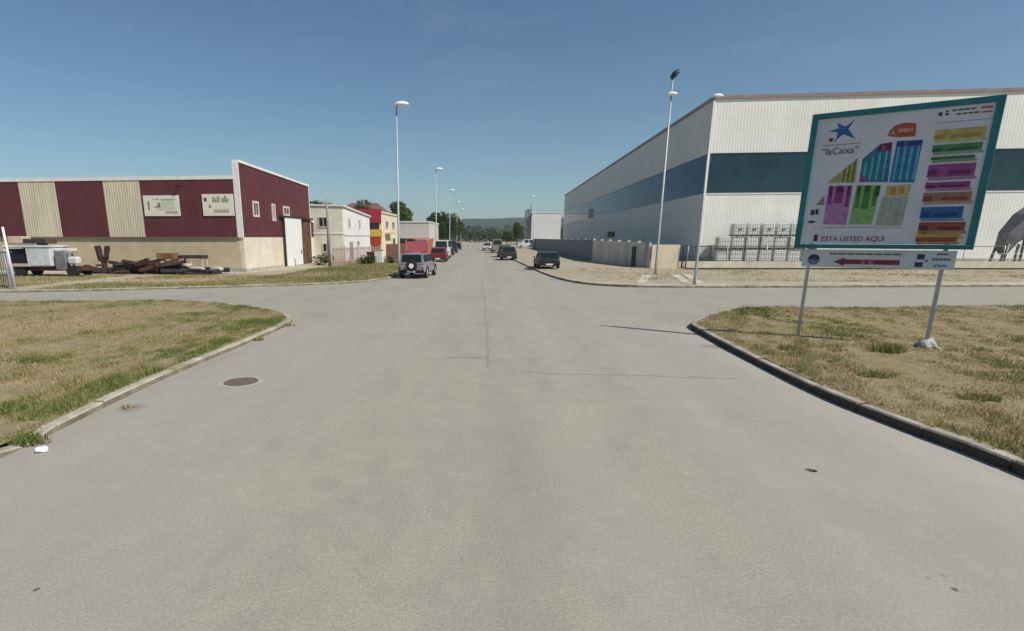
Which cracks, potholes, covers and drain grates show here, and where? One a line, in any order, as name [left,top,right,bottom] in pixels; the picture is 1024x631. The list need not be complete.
manhole cover [217,376,264,388]
